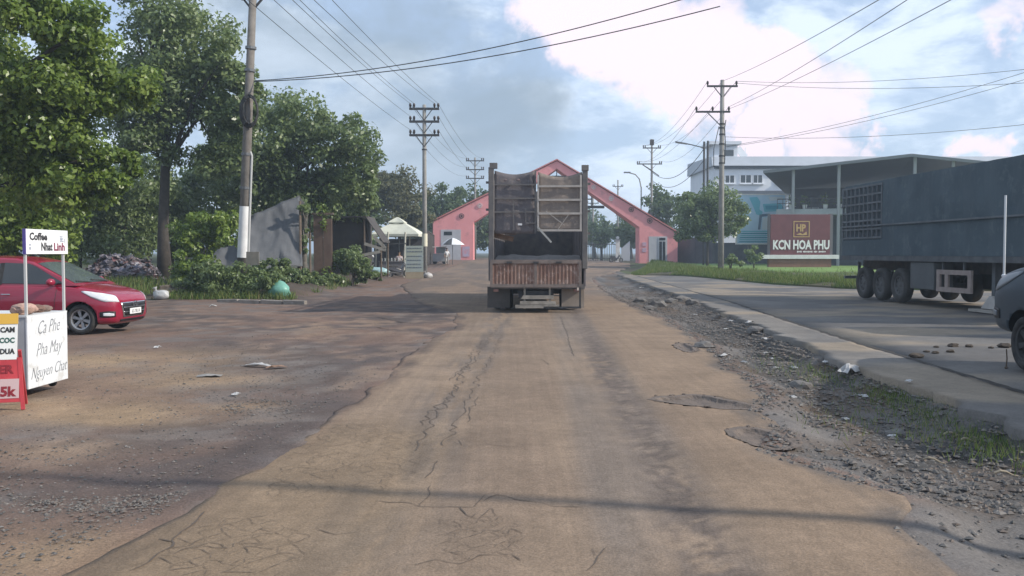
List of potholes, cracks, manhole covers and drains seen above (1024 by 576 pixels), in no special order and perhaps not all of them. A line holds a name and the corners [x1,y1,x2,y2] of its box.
crack [267,331,578,565]
pothole [672,342,699,353]
pothole [649,393,762,410]
crack [134,511,351,576]
pothole [725,425,803,451]
